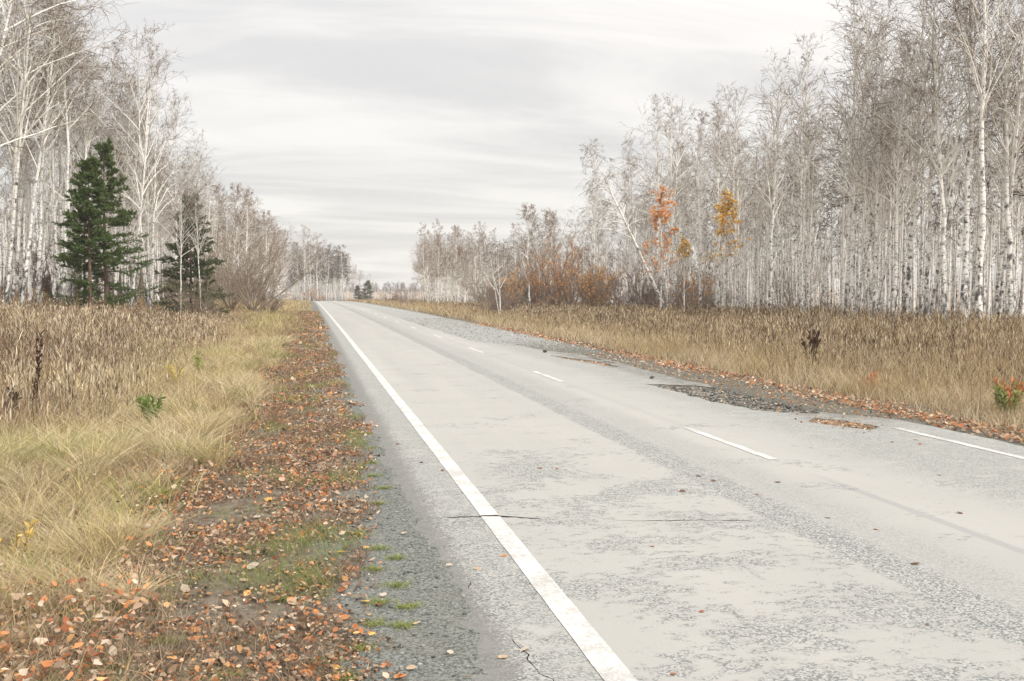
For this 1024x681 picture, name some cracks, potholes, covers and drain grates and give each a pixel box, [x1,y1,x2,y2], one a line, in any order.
pothole [551,355,618,367]
pothole [809,418,878,430]
pothole [647,384,819,414]
